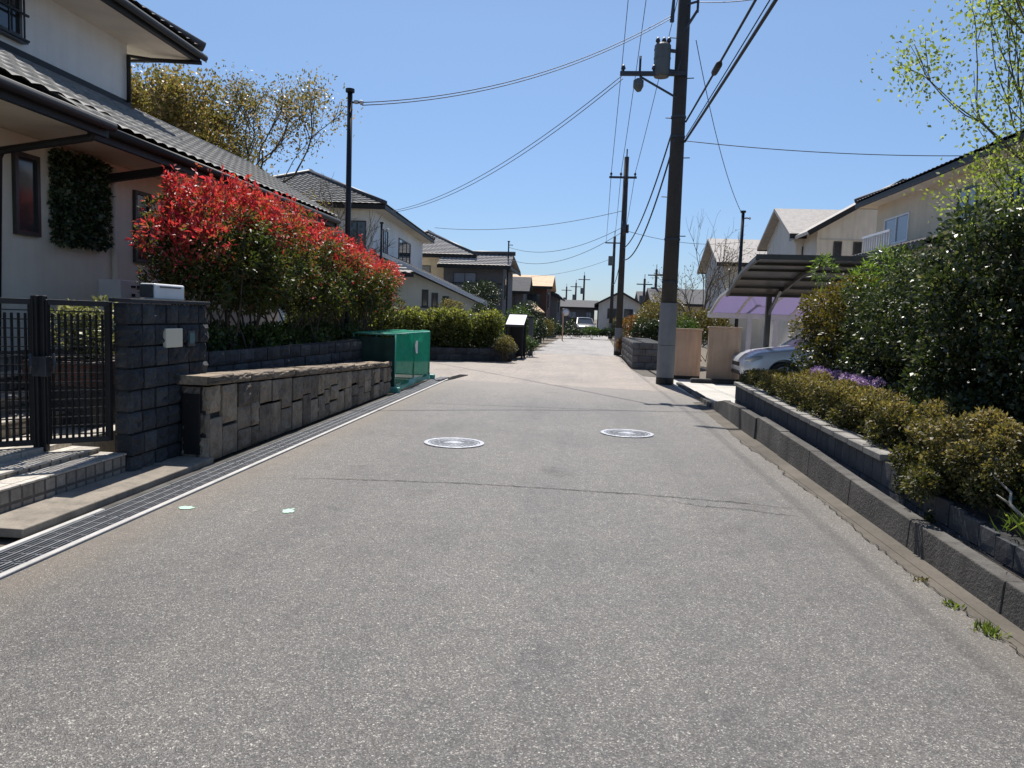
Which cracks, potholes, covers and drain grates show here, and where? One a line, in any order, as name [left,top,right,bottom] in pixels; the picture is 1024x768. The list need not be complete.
drain grate [95,484,200,518]
drain grate [371,398,400,406]
manhole cover [600,429,654,438]
drain grate [171,462,253,487]
drain grate [269,432,322,447]
drain grate [0,561,26,573]
drain grate [330,412,367,422]
drain grate [0,515,129,564]
drain grate [227,445,292,464]
drain grate [352,404,386,413]
manhole cover [424,437,484,448]
drain grate [302,421,347,433]
